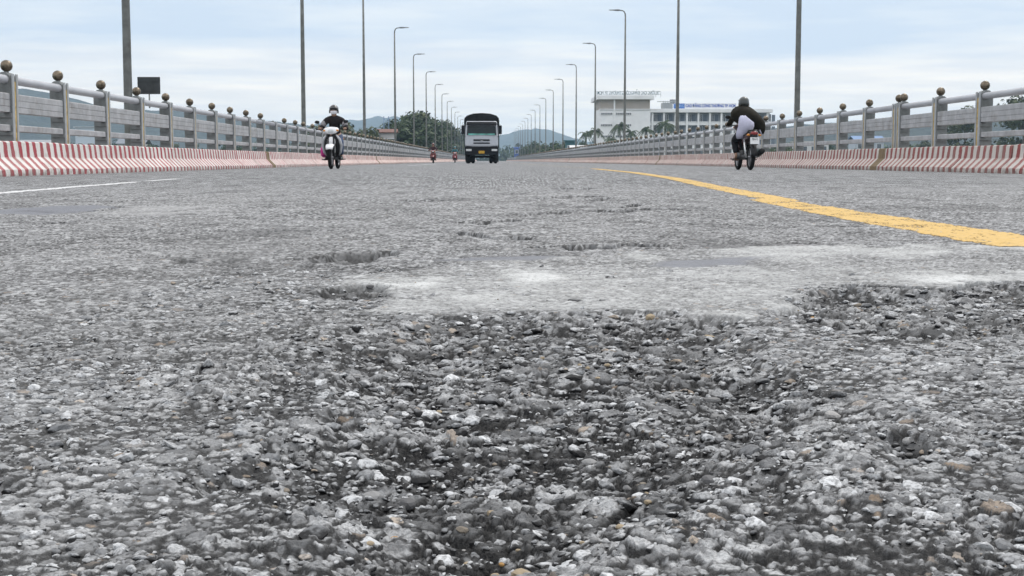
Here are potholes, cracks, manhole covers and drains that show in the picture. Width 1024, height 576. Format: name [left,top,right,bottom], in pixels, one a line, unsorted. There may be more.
pothole [185,309,902,576]
pothole [870,429,950,460]
pothole [763,283,1024,342]
pothole [303,283,398,302]
pothole [293,250,405,265]
pothole [0,478,25,496]
